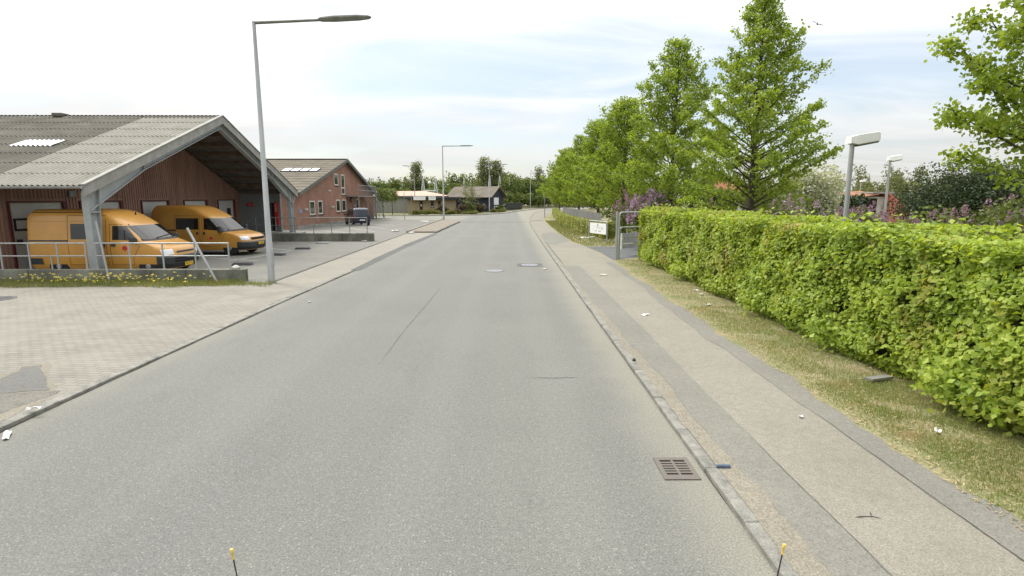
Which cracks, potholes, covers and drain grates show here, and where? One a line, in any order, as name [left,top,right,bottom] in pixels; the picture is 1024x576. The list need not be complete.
drain grate [653,457,701,480]
